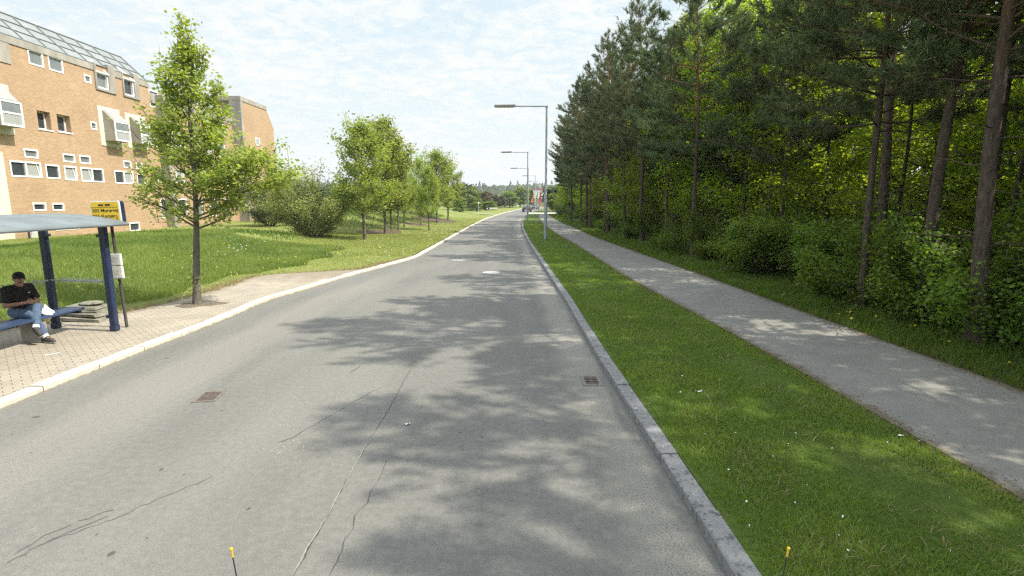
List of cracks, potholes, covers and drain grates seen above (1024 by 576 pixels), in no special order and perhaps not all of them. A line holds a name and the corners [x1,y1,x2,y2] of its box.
crack [291,371,410,576]
drain grate [191,390,226,403]
drain grate [579,375,604,386]
